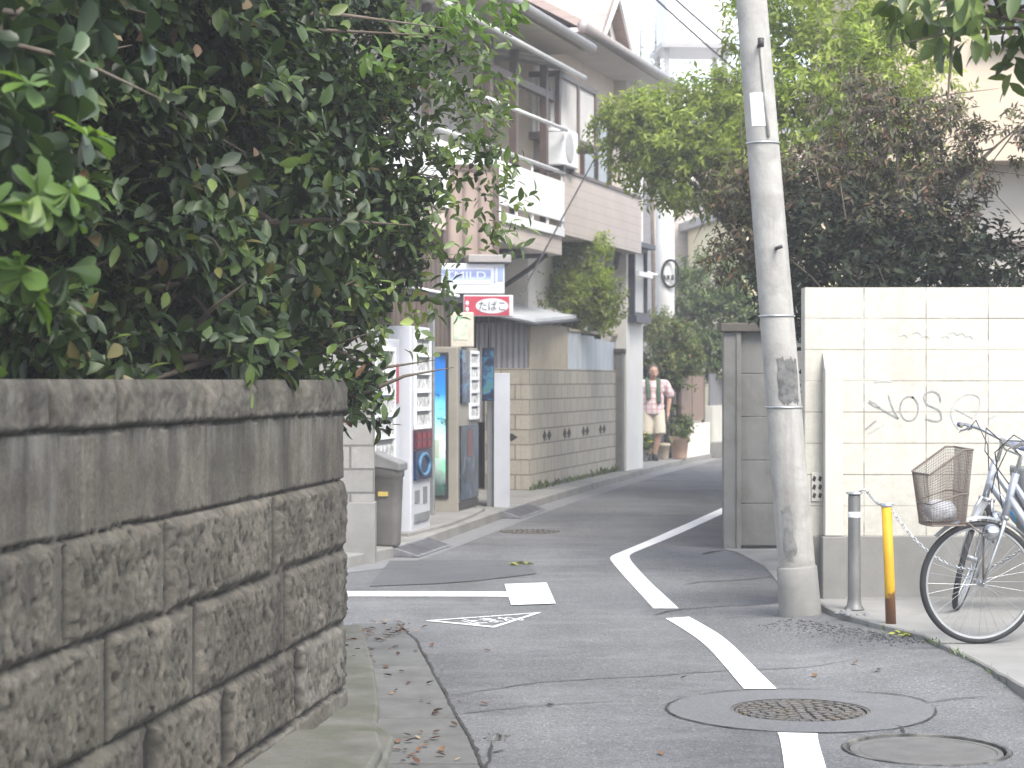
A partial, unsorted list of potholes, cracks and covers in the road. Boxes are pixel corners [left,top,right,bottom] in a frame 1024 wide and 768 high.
manhole cover [842,733,1012,767]
manhole cover [665,689,937,733]
